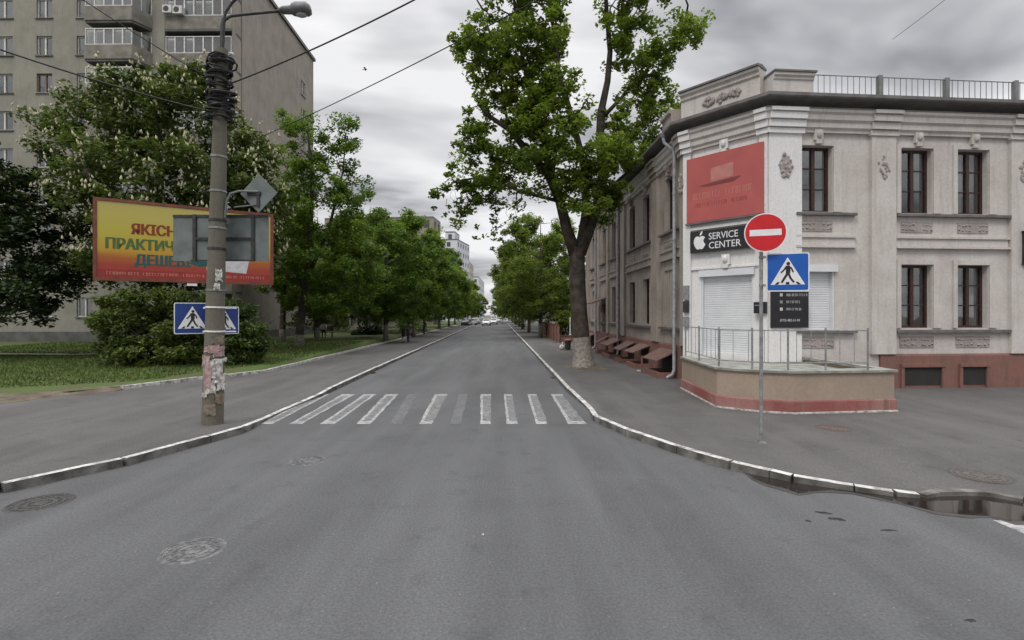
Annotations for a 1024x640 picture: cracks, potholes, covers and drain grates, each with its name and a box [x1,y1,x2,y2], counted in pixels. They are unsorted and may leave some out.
manhole cover [946,468,1017,484]
manhole cover [288,456,326,466]
manhole cover [157,537,227,565]
manhole cover [1,493,76,514]
